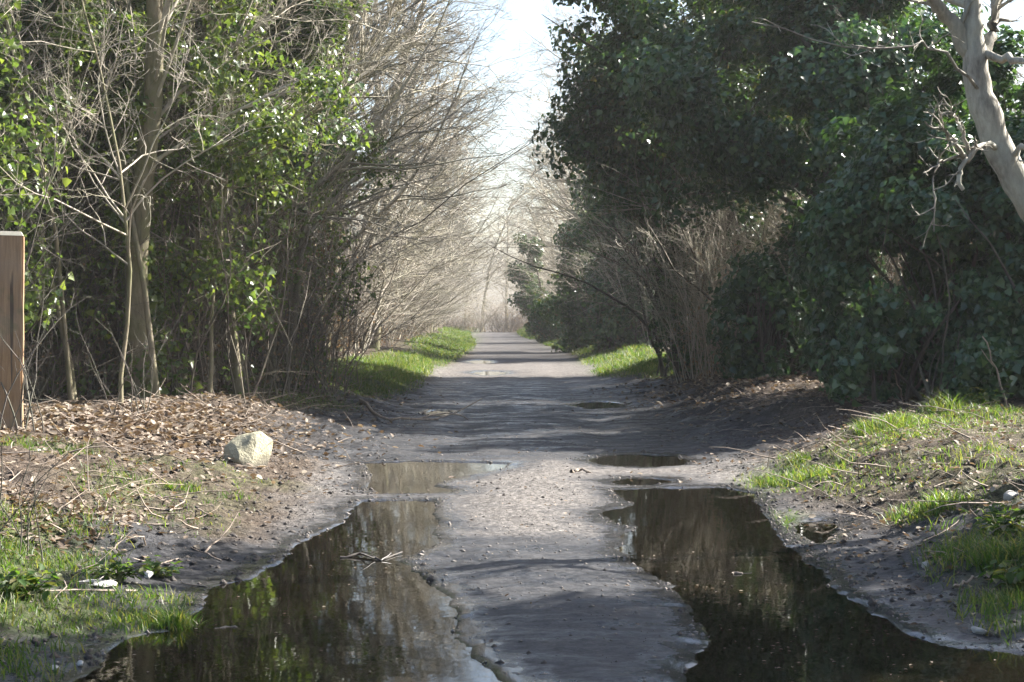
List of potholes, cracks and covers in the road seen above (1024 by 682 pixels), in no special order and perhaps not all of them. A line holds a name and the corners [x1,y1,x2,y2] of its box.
pothole [47,498,527,682]
pothole [570,401,625,409]
pothole [590,485,1024,682]
pothole [360,460,512,494]
pothole [579,453,696,467]
